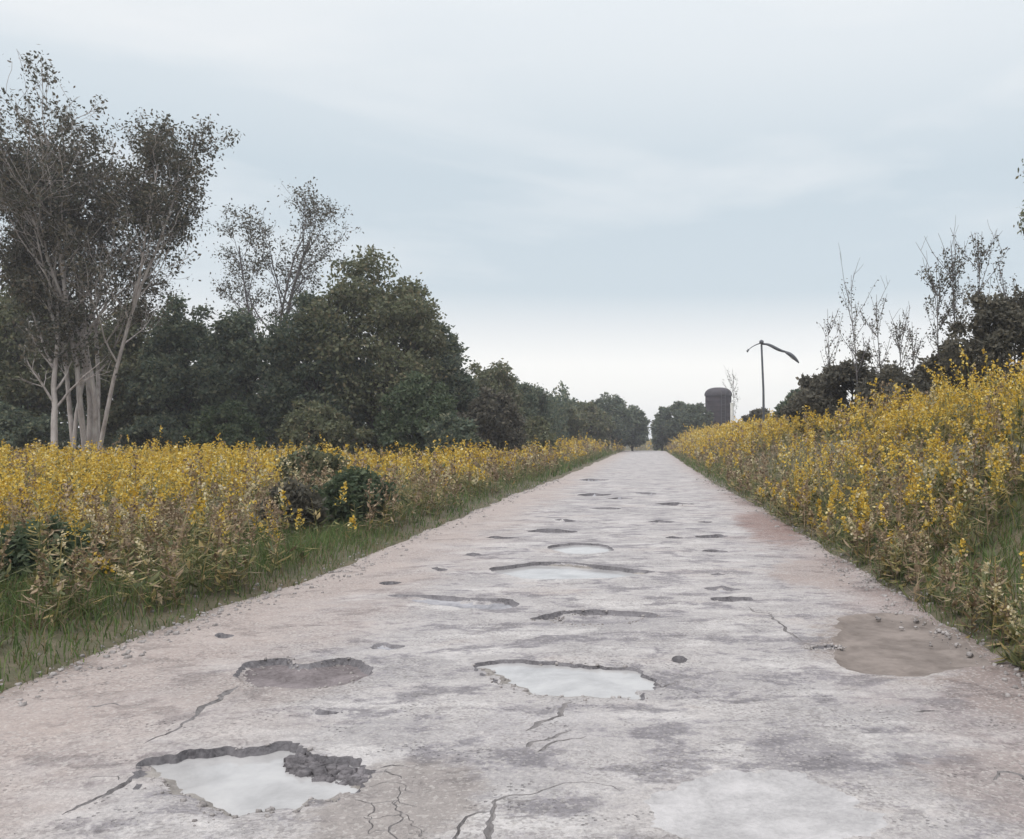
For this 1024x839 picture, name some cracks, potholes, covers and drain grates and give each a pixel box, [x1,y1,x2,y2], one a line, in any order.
pothole [548,543,614,554]
crack [143,686,239,744]
pothole [472,659,662,703]
crack [452,782,620,839]
pothole [233,656,374,690]
pothole [125,741,376,826]
crack [749,607,802,641]
crack [62,776,132,815]
crack [358,765,422,839]
pothole [489,562,655,579]
pothole [831,613,990,677]
crack [526,701,586,752]
